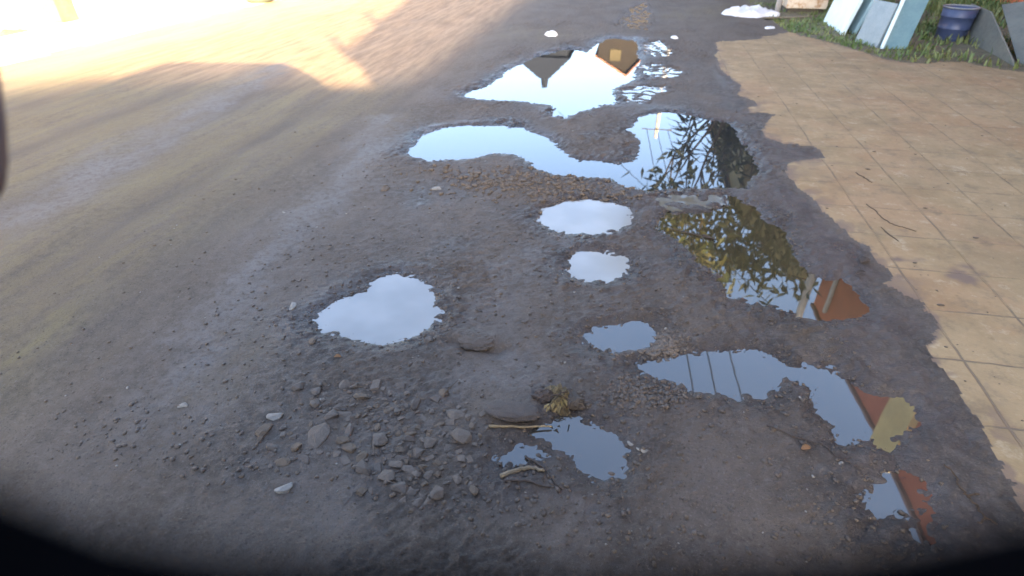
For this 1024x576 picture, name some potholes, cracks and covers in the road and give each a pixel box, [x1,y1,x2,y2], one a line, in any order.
pothole [451,35,649,120]
pothole [394,106,778,198]
pothole [545,239,648,292]
pothole [609,331,956,464]
pothole [832,454,971,545]
